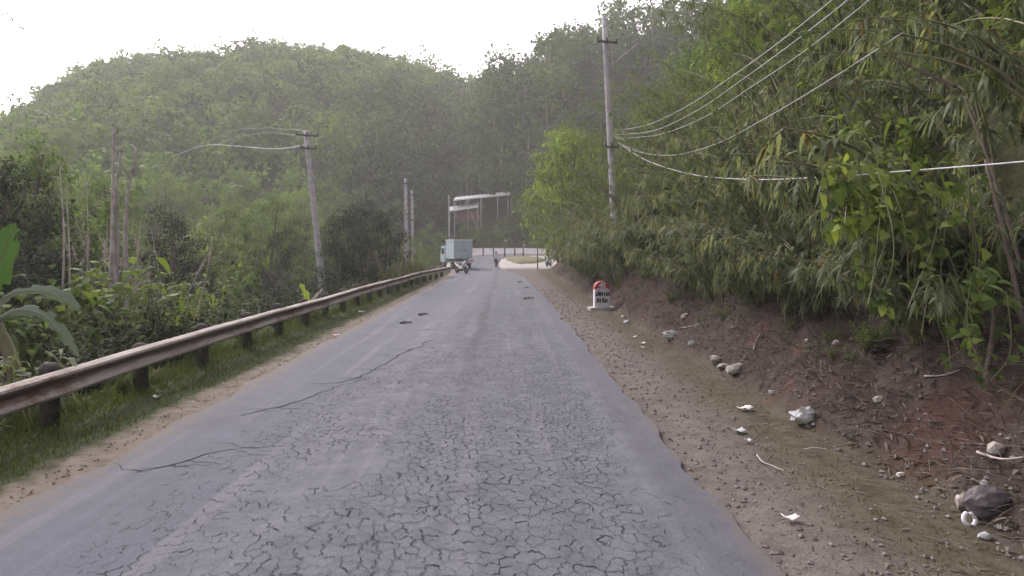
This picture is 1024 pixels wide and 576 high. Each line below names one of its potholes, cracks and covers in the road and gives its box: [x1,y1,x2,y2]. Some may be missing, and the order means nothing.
crack [45,282,746,576]
